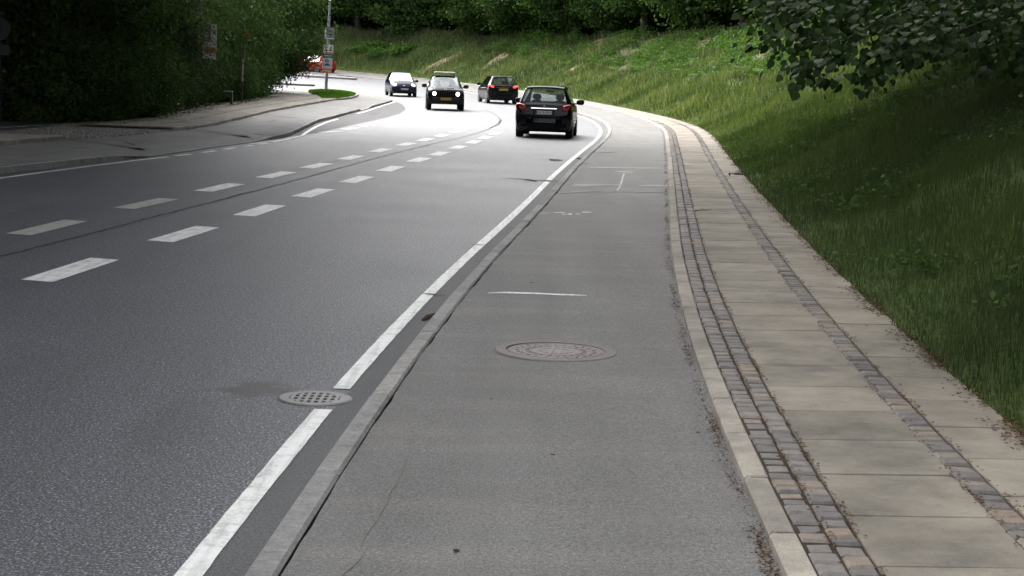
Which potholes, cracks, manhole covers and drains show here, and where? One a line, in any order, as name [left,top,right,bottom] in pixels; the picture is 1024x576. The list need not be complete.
drain grate [277,391,352,406]
manhole cover [494,340,617,362]
